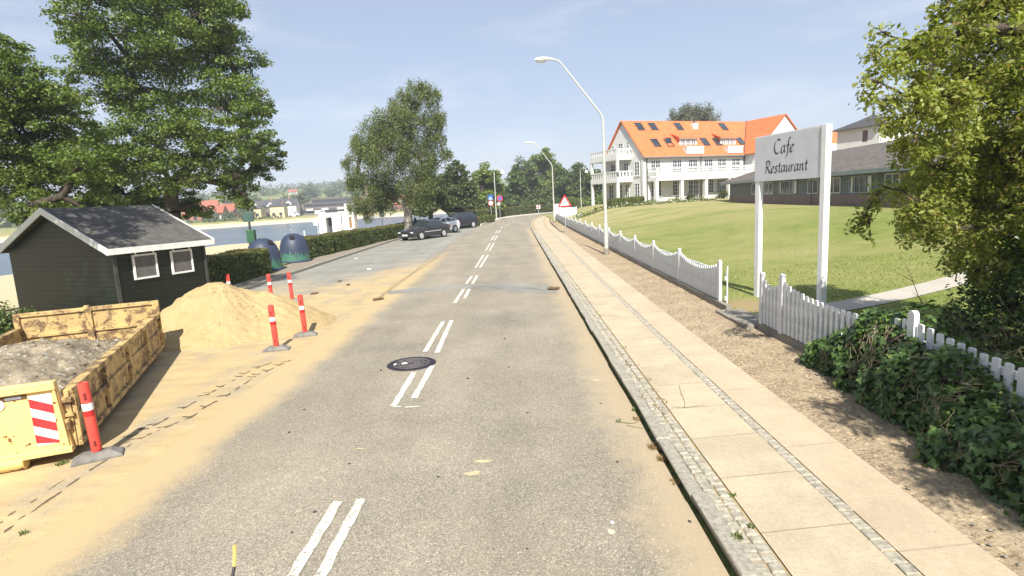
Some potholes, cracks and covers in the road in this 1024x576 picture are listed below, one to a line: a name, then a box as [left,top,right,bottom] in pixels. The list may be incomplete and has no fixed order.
manhole cover [387,357,436,371]
